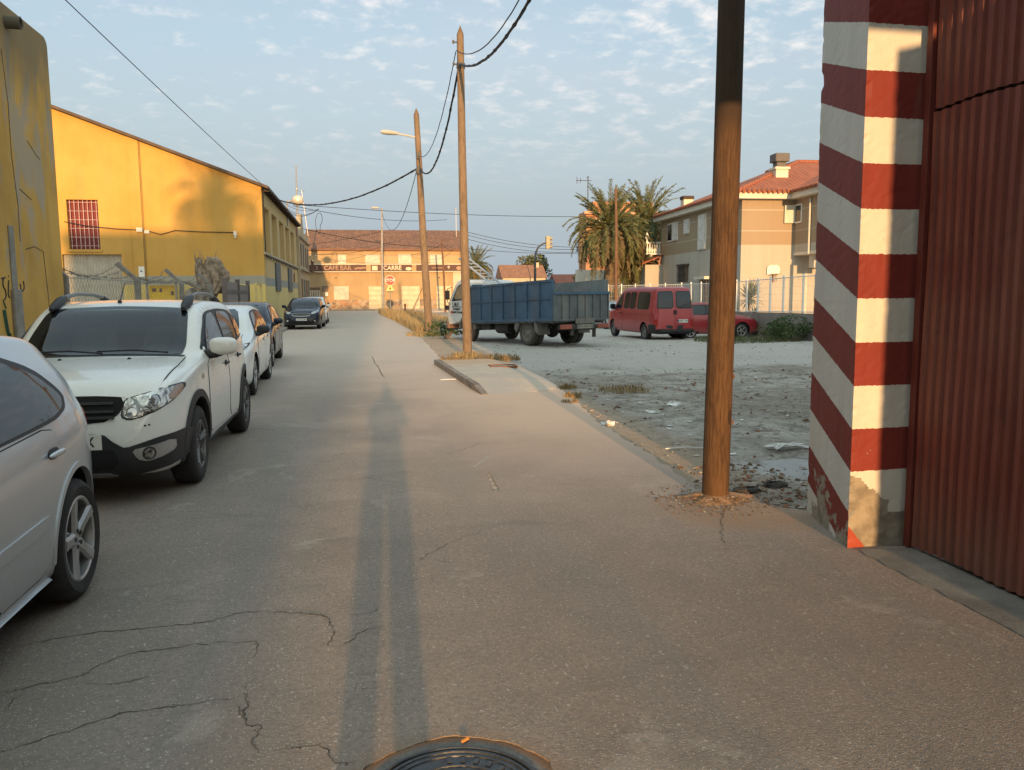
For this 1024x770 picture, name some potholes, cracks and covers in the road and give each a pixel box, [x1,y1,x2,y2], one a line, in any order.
crack [4,641,259,709]
manhole cover [364,737,552,770]
crack [2,687,262,755]
crack [11,605,381,648]
crack [277,744,348,765]
